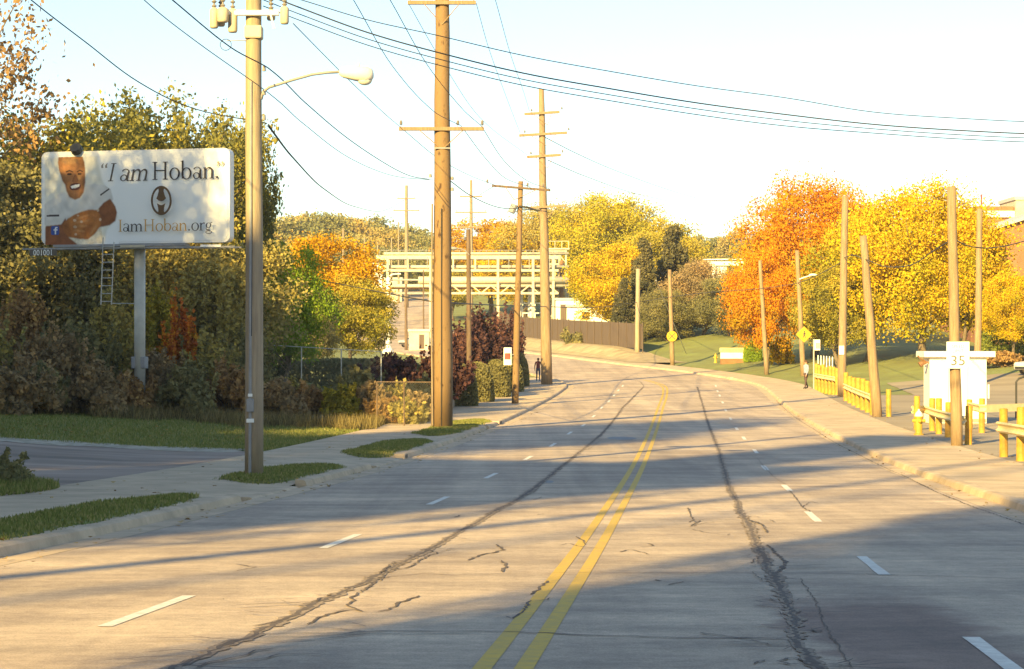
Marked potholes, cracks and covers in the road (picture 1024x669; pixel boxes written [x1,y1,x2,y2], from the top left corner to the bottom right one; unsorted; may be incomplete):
crack [801,580,853,668]
